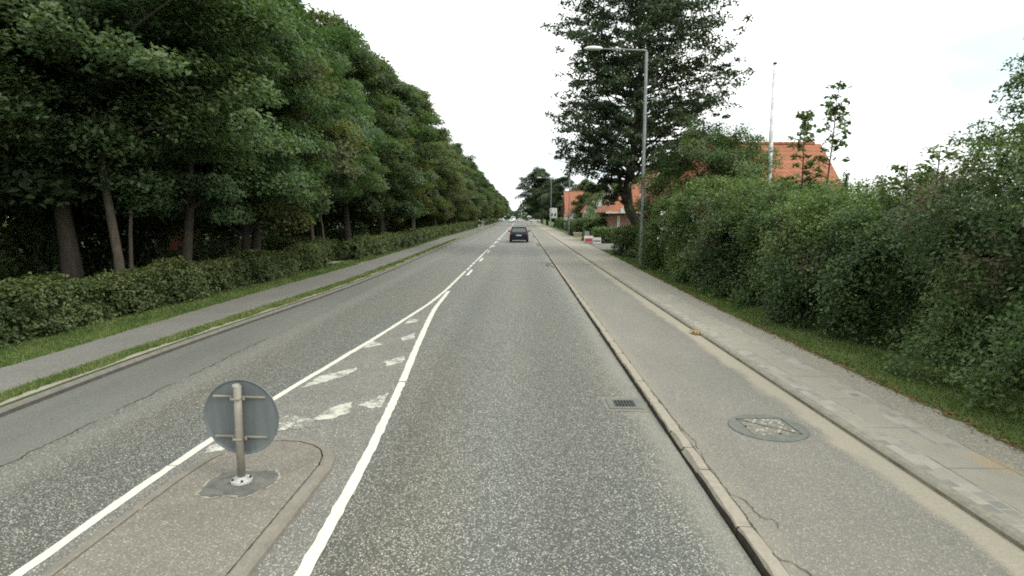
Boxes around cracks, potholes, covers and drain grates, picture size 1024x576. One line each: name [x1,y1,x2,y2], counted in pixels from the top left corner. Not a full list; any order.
manhole cover [728,414,810,442]
drain grate [605,398,644,409]
